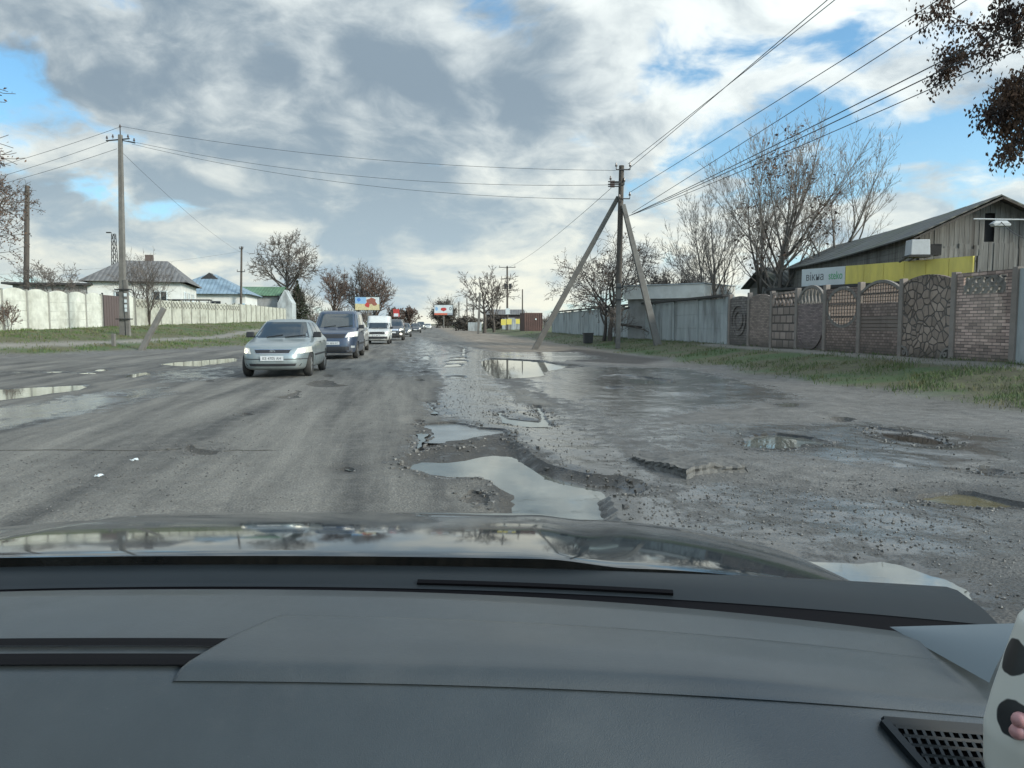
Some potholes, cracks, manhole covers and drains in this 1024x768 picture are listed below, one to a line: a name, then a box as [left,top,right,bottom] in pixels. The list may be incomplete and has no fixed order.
pothole [477,358,584,379]
pothole [740,432,830,450]
pothole [495,405,555,428]
pothole [418,422,511,448]
pothole [867,427,955,448]
pothole [398,438,651,521]
pothole [413,433,431,453]
